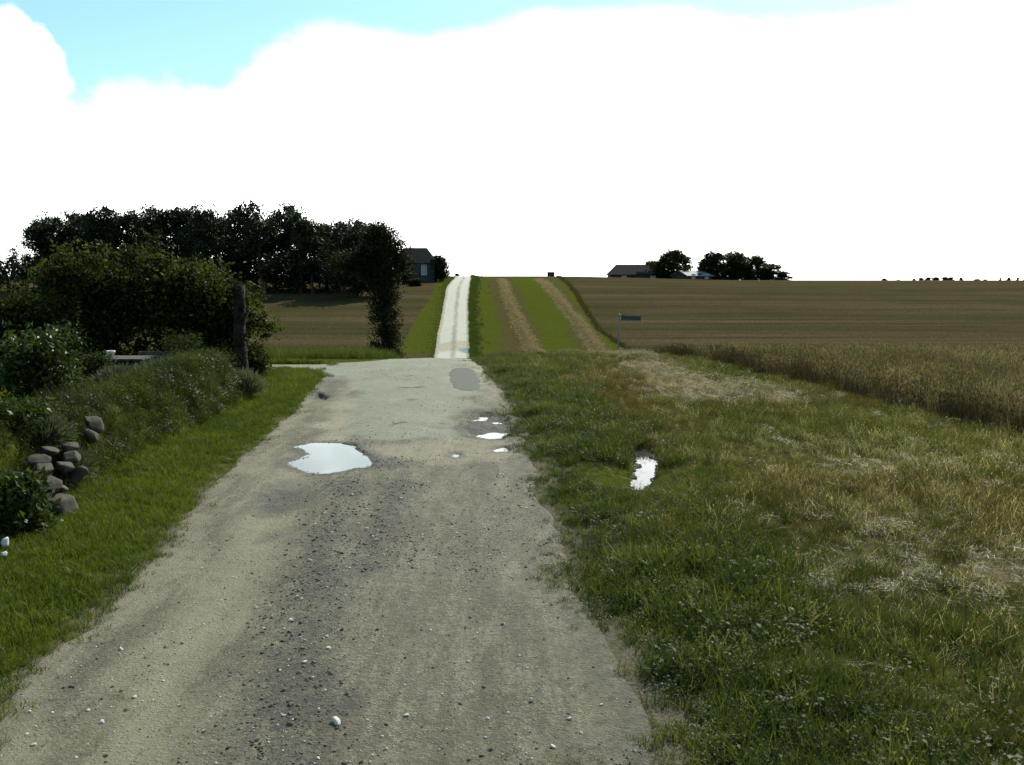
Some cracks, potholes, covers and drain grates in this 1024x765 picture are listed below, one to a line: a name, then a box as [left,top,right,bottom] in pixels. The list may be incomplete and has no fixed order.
pothole [483,444,520,454]
pothole [279,441,387,476]
pothole [454,410,529,440]
